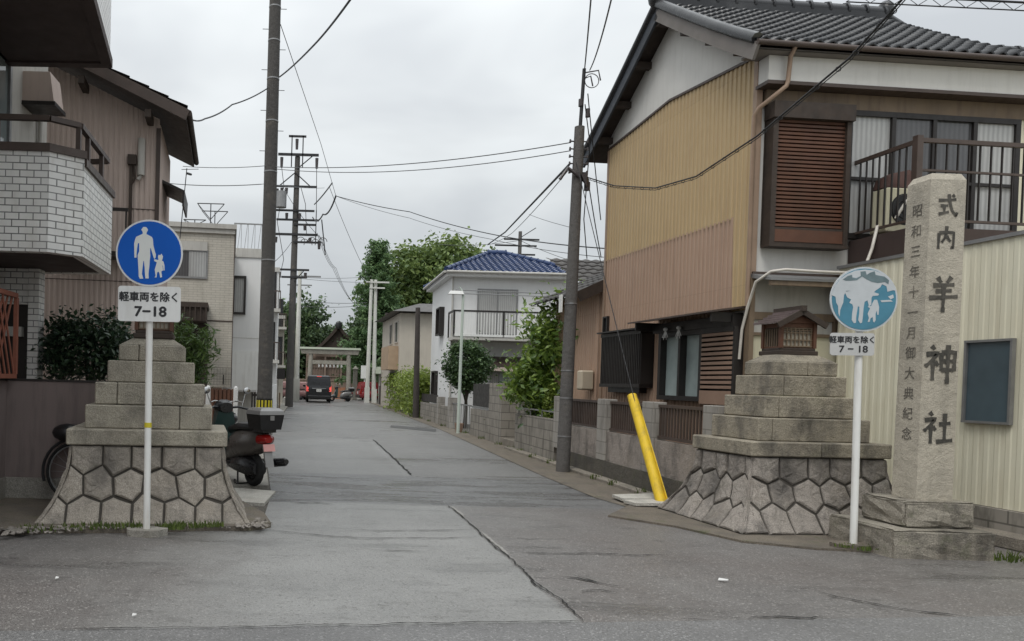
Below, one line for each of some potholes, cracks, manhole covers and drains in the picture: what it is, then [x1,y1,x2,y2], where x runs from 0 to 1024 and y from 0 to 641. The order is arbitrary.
crack [815,590,978,619]
